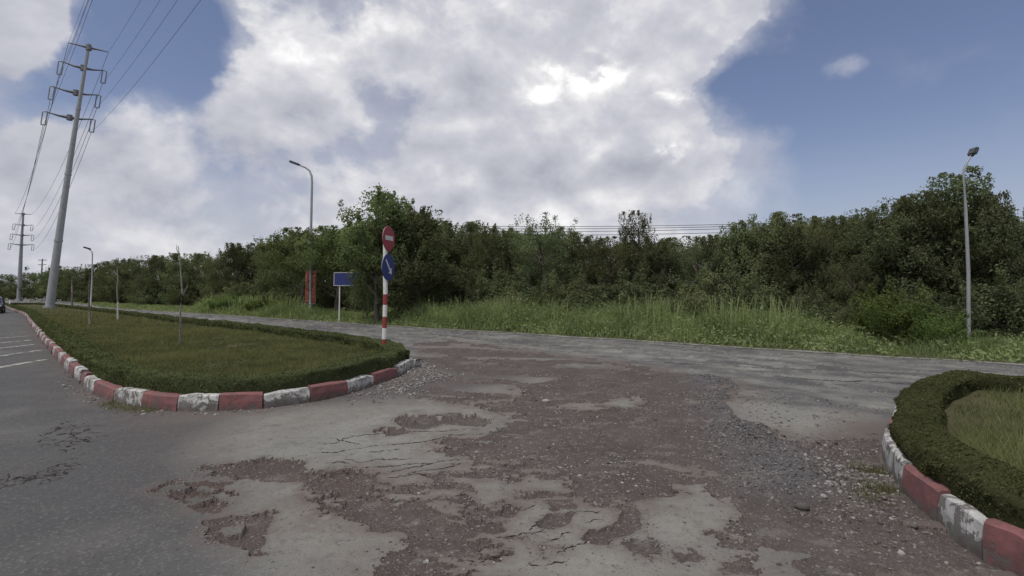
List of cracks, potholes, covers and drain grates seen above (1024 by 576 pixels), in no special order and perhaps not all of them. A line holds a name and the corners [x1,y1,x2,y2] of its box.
pothole [200,457,326,483]
pothole [301,340,1002,576]
pothole [144,479,240,514]
crack [313,428,502,478]
crack [456,504,605,566]
pothole [201,509,280,557]
